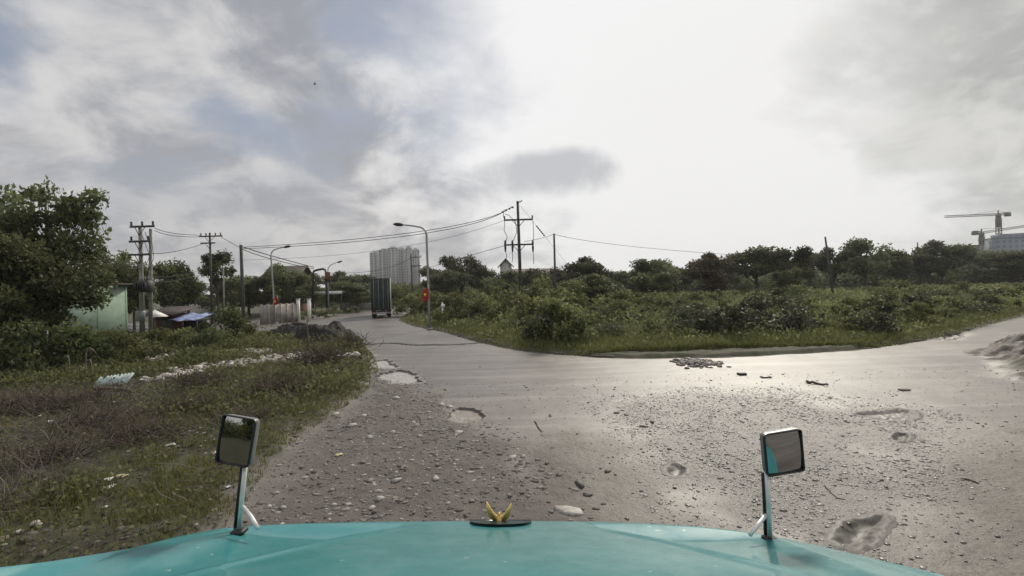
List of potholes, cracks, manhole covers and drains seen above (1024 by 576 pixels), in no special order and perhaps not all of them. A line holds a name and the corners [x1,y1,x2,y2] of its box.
pothole [371,369,426,385]
pothole [660,462,693,478]
pothole [823,512,898,554]
pothole [442,406,490,425]
pothole [369,359,401,370]
pothole [848,408,924,424]
pothole [885,431,916,443]
